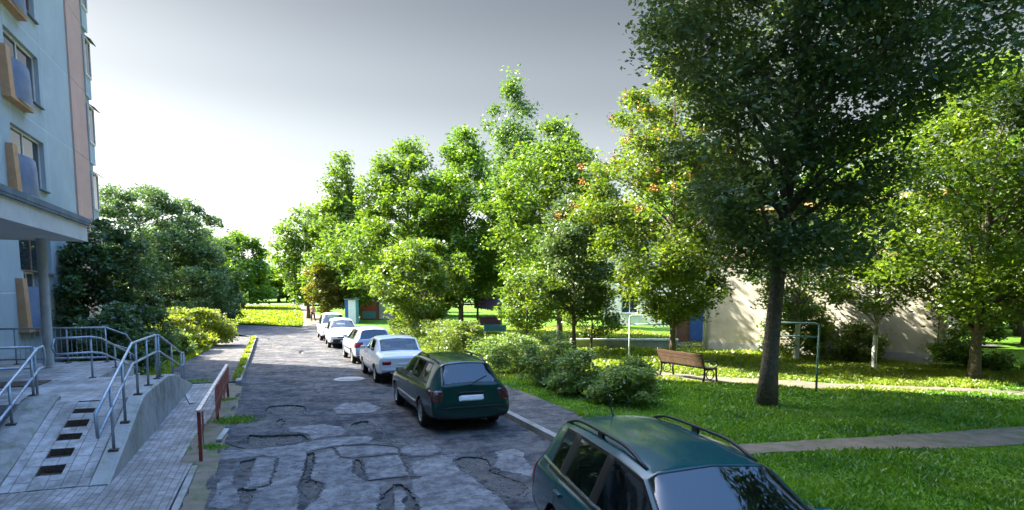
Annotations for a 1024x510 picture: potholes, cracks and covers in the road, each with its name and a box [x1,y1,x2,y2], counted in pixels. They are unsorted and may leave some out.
pothole [297,452,324,501]
pothole [247,434,308,447]
pothole [377,483,419,510]
crack [310,395,441,481]
pothole [455,456,529,500]
pothole [265,405,306,414]
